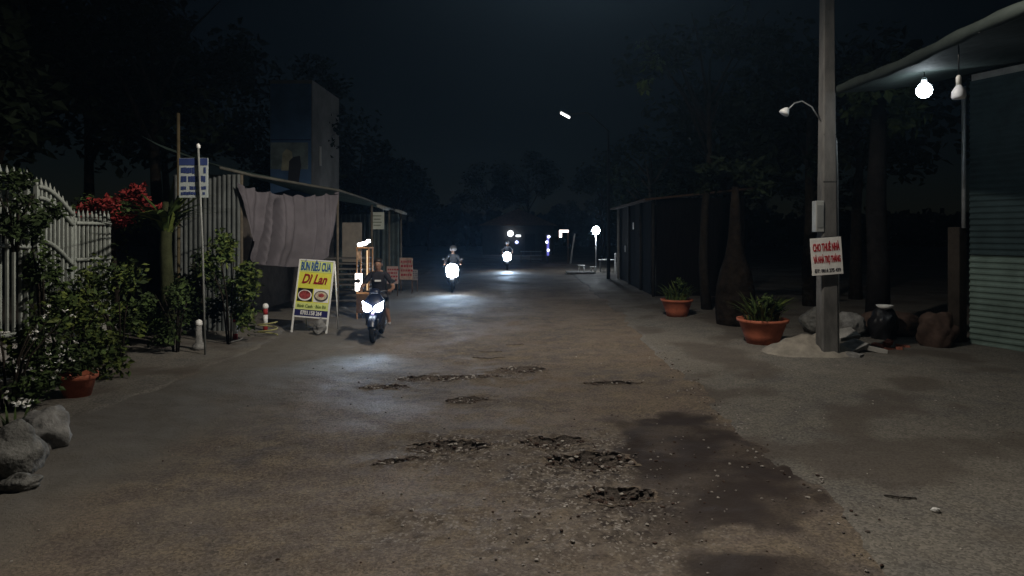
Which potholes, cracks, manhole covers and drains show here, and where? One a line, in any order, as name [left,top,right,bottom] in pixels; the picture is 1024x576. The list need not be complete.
pothole [578,486,664,507]
pothole [513,435,593,451]
pothole [541,449,642,474]
pothole [494,366,548,374]
pothole [392,374,503,382]
pothole [401,438,494,456]
pothole [444,396,490,404]
pothole [371,455,422,466]
